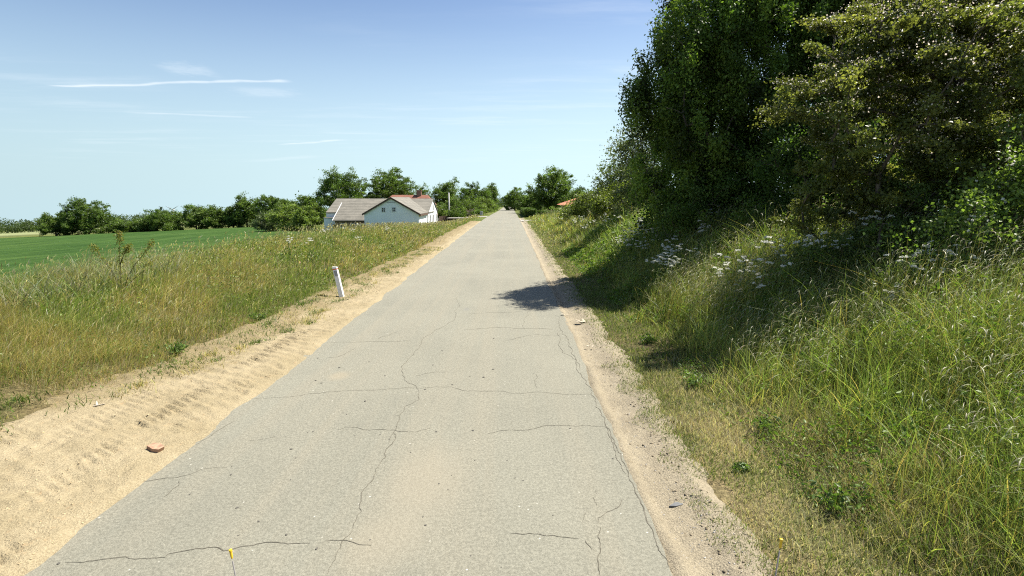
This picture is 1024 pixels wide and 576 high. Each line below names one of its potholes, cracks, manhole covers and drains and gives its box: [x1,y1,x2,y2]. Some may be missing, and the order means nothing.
crack [488,318,674,575]
crack [65,303,559,574]
